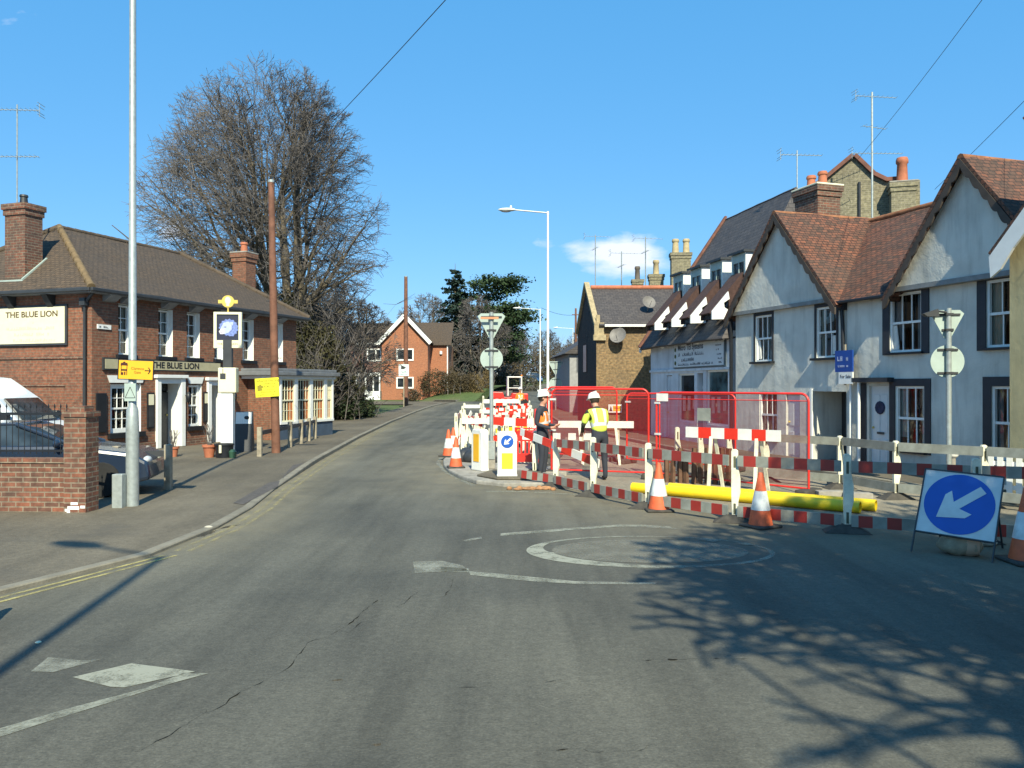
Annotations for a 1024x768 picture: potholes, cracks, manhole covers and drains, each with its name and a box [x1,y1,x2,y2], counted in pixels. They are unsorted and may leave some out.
crack [136,601,376,752]
